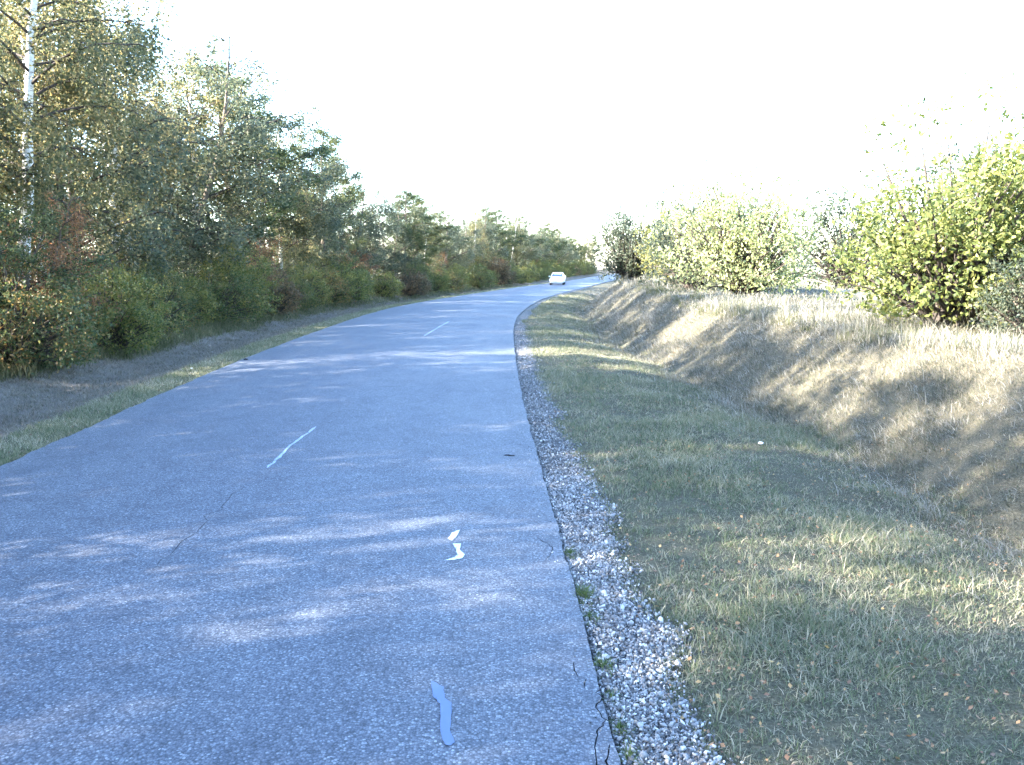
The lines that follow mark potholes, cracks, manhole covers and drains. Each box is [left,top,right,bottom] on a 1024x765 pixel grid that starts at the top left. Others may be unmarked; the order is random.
crack [154,489,242,570]
crack [573,662,610,765]
